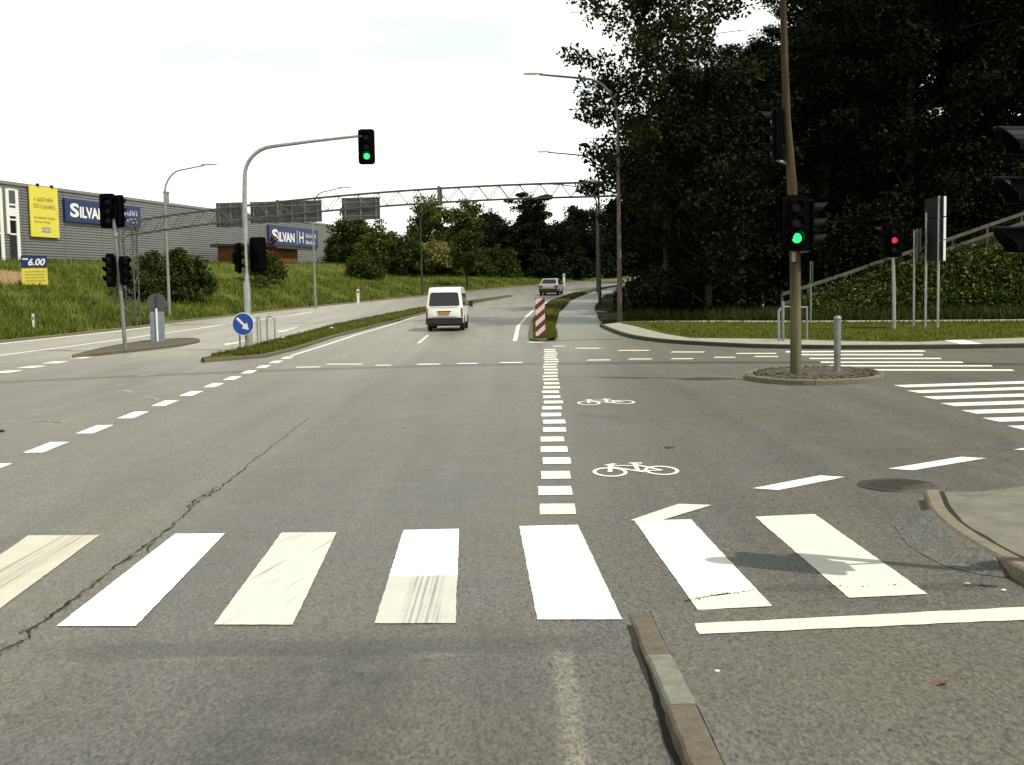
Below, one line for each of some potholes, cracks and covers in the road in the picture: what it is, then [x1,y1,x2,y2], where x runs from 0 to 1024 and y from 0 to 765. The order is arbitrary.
manhole cover [857,478,938,492]
